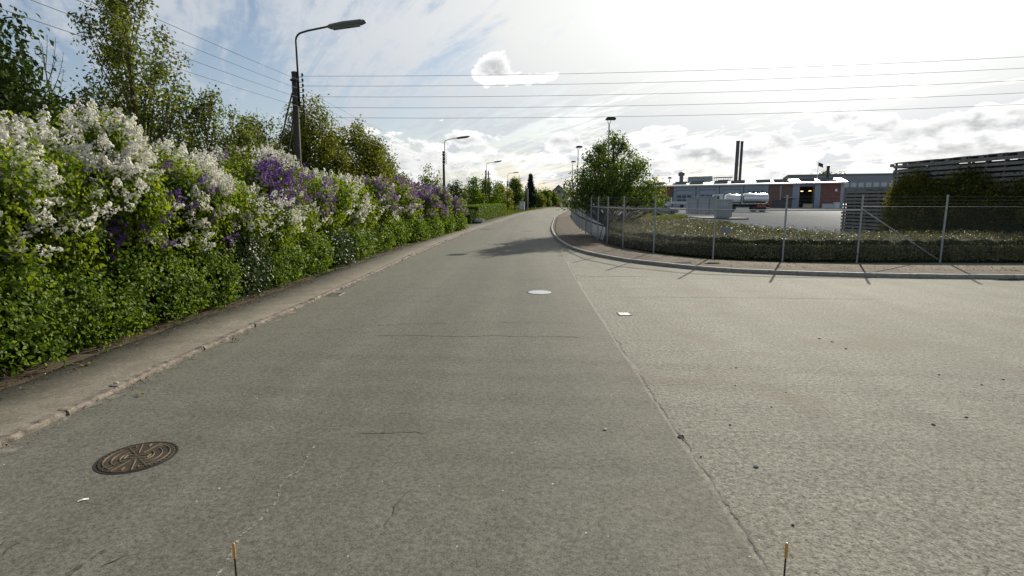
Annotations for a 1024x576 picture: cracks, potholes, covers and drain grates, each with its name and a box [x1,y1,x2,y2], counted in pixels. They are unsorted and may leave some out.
manhole cover [93,441,179,475]
crack [216,442,319,576]
crack [333,321,570,337]
